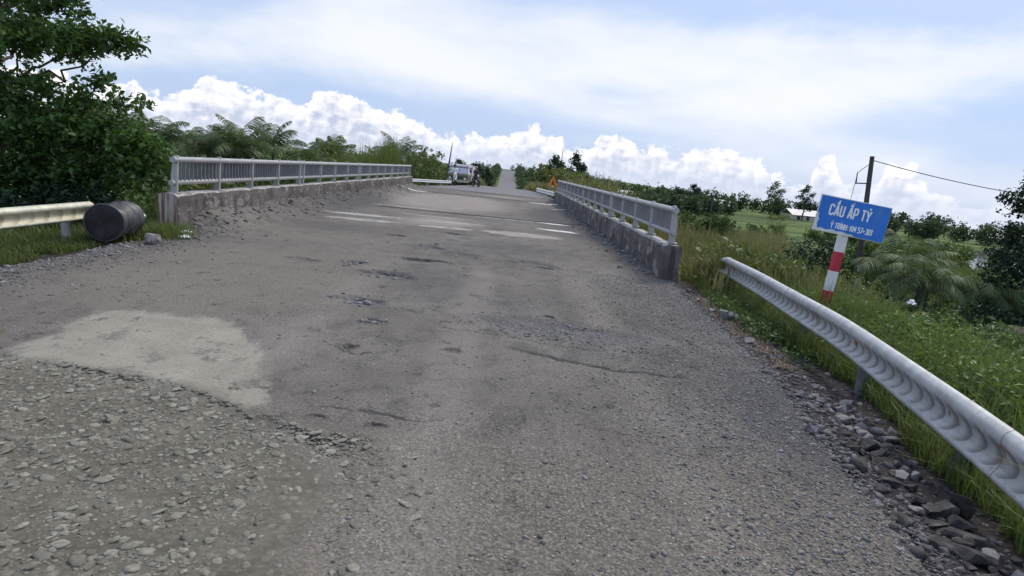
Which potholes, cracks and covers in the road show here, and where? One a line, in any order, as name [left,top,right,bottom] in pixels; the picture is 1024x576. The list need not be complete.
crack [398,308,692,380]
pothole [339,343,365,351]
pothole [319,293,400,310]
pothole [392,256,456,264]
pothole [439,347,467,355]
crack [315,404,451,425]
